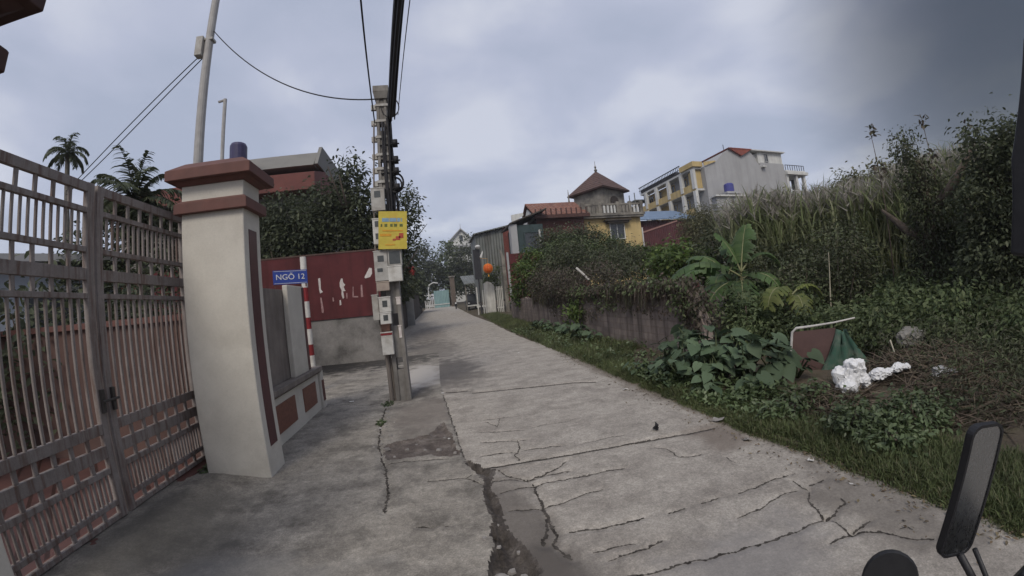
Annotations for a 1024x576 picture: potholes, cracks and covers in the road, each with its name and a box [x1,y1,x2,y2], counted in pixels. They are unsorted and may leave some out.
crack [326,399,435,513]
crack [427,395,934,576]
